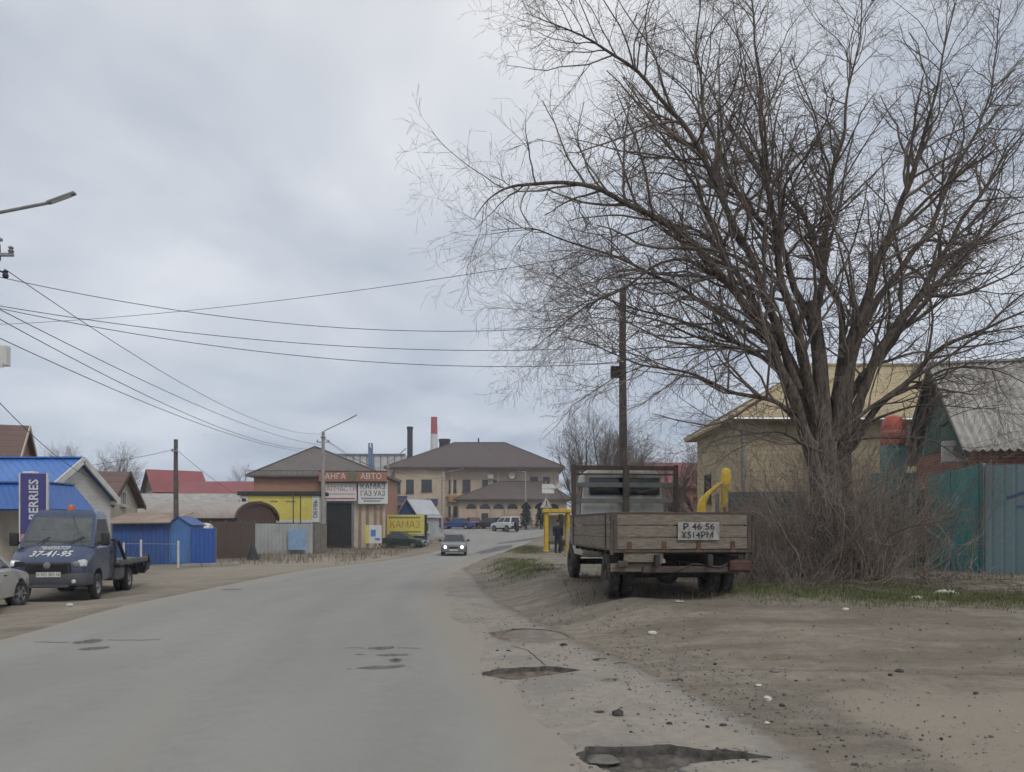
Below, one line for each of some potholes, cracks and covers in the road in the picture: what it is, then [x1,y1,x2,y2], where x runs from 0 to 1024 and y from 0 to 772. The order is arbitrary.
pothole [567,742,781,772]
pothole [476,665,586,682]
pothole [485,628,573,645]
